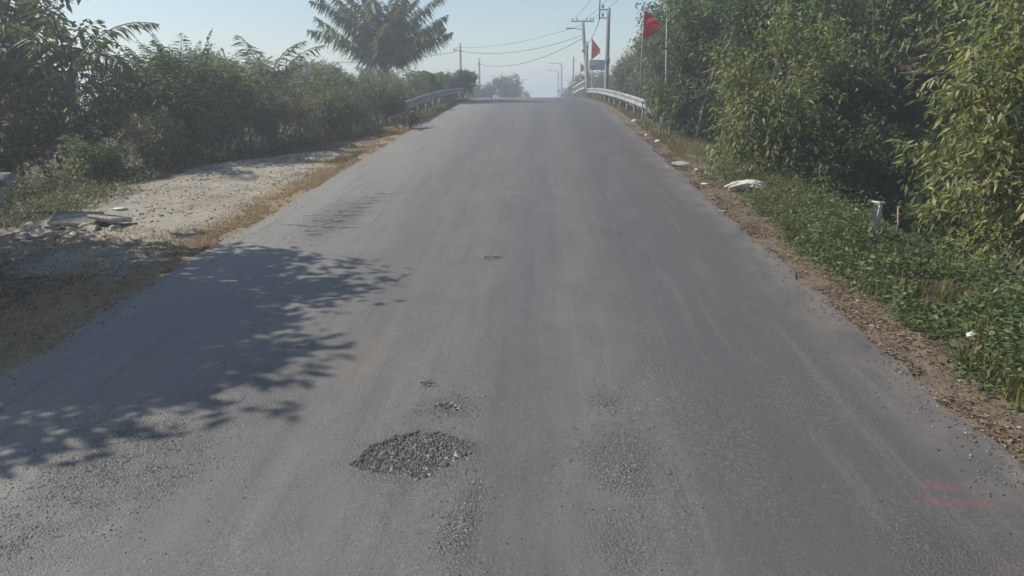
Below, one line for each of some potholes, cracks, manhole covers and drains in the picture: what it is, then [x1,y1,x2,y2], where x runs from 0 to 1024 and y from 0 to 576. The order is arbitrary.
pothole [433,402,462,411]
pothole [349,430,479,482]
